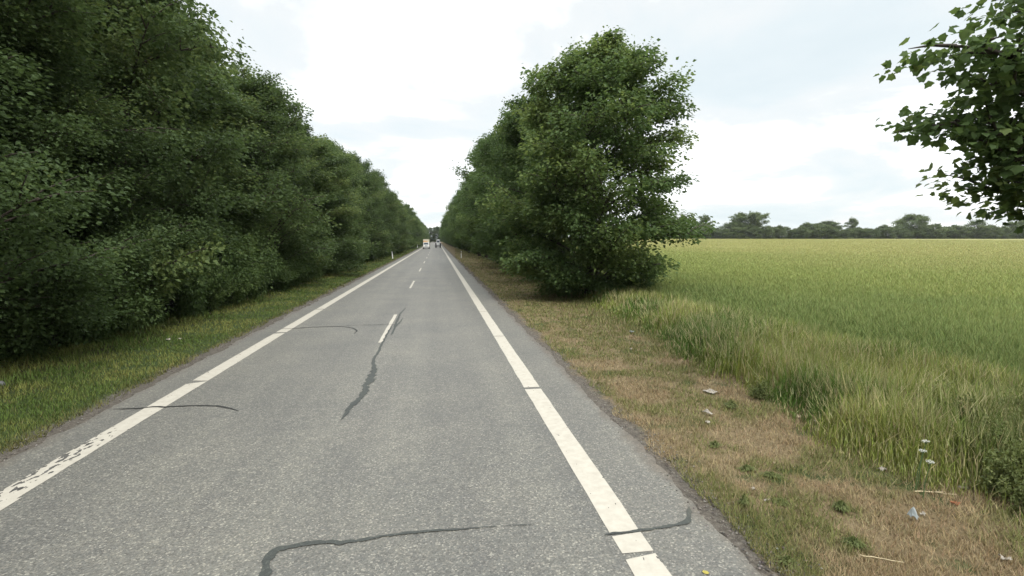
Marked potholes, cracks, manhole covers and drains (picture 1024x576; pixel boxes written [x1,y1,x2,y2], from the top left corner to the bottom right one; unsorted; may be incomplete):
crack [259,524,528,576]
crack [605,506,692,535]
crack [286,309,405,420]
